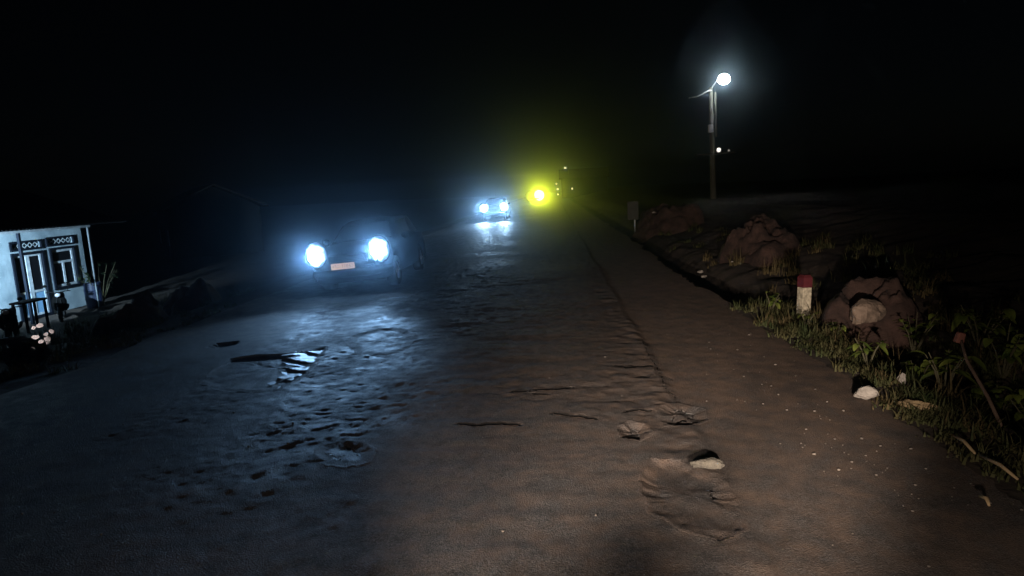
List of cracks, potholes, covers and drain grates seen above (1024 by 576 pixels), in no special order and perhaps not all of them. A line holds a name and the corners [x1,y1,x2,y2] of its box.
pothole [616,420,656,442]
pothole [207,340,241,349]
pothole [652,402,712,427]
crack [511,386,598,420]
pothole [638,456,749,541]
pothole [197,346,327,393]
pothole [313,440,378,468]
